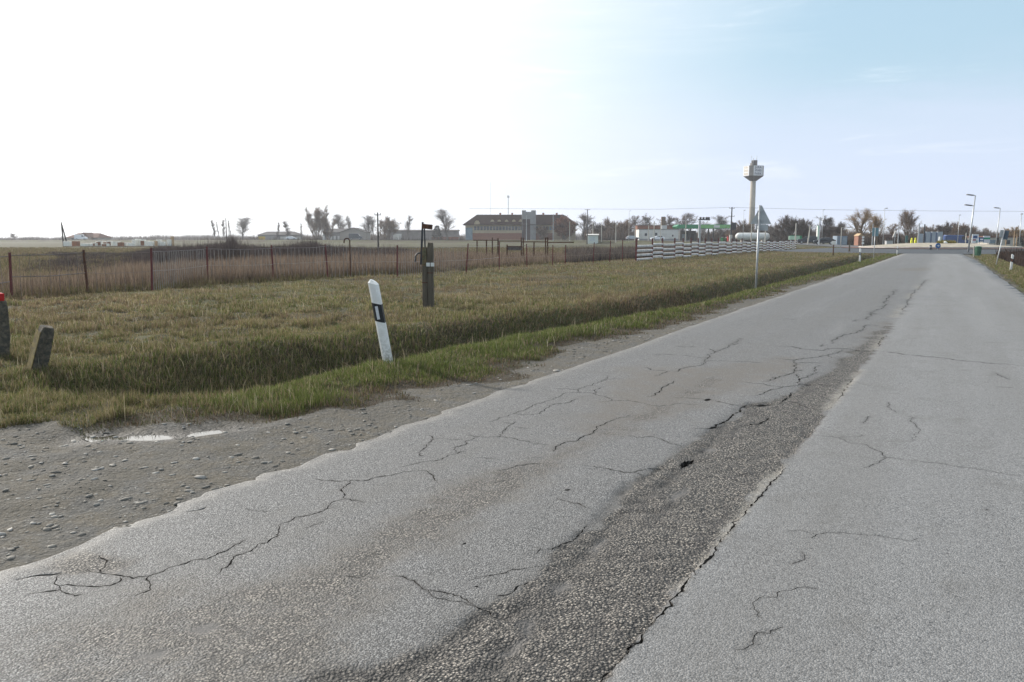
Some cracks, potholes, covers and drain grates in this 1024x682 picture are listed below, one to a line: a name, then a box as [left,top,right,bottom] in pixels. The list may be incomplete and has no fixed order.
crack [18,291,1020,596]
crack [736,587,817,650]
crack [402,526,587,621]
